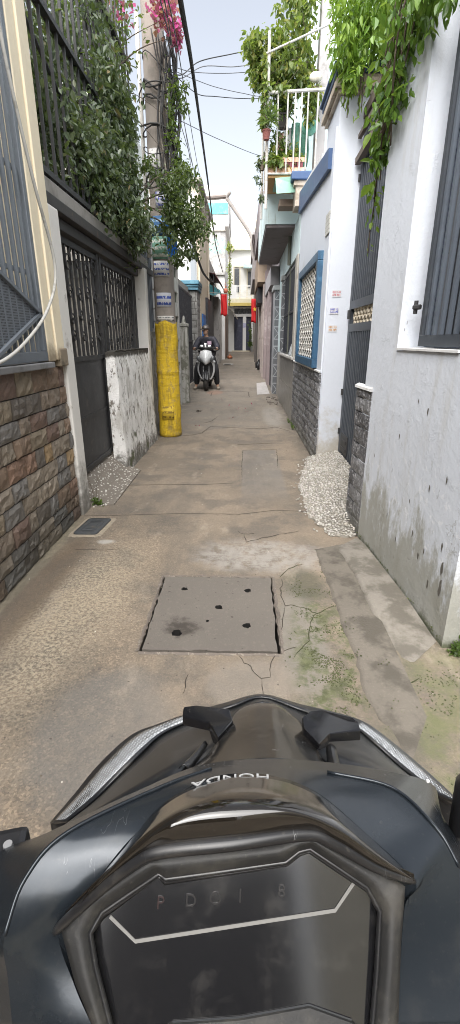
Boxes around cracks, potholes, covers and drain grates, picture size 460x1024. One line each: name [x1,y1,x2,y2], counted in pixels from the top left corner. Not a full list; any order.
manhole cover [134,575,285,657]
crack [240,564,333,694]
